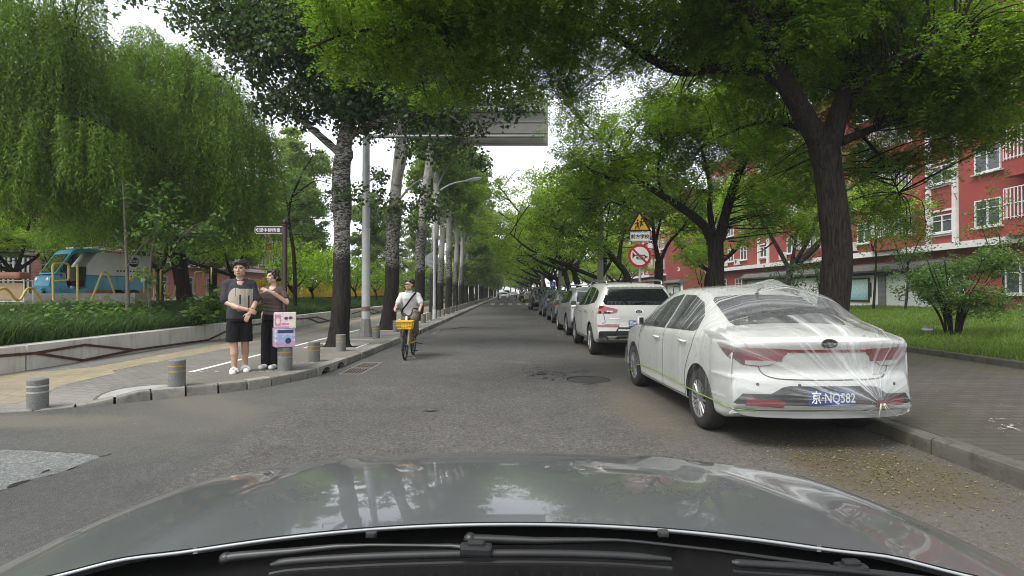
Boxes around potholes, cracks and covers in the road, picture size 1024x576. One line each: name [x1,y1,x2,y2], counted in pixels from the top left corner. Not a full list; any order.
drain grate [339,362,383,374]
